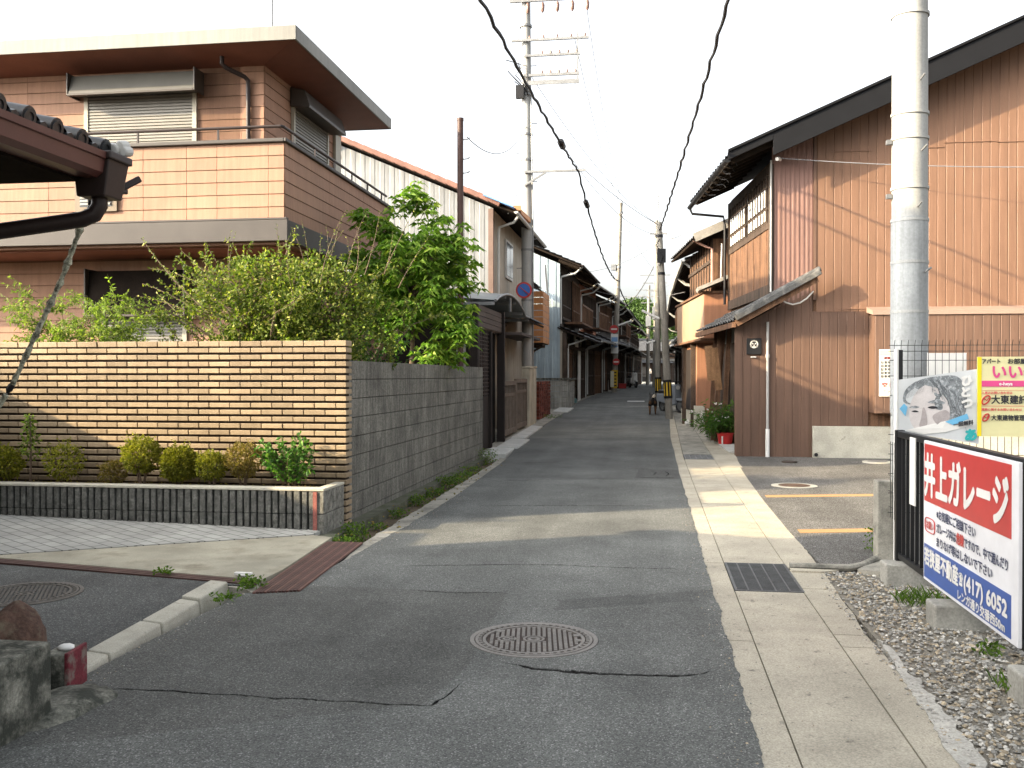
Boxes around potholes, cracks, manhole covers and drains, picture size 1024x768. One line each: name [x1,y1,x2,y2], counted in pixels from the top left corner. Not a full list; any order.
manhole cover [470,622,598,658]
manhole cover [0,582,84,607]
crack [521,666,706,677]
drain grate [724,562,805,593]
